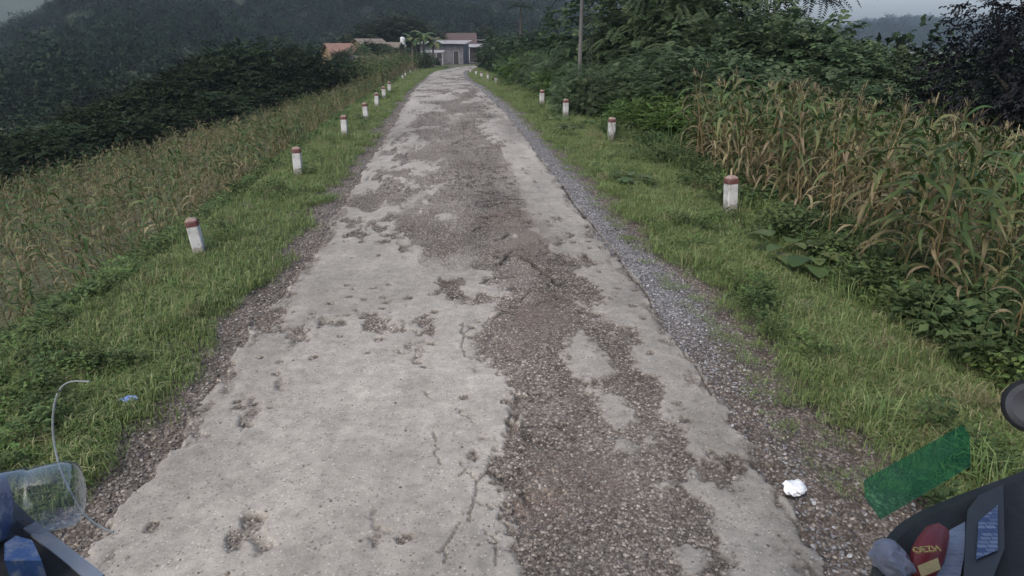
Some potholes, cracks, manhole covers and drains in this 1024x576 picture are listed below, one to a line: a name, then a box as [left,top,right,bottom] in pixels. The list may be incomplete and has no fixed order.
pothole [498,392,529,441]
pothole [218,507,281,558]
pothole [358,317,402,335]
crack [430,404,503,566]
pothole [471,146,505,157]
crack [470,184,661,317]
pothole [230,400,275,434]
pothole [360,505,405,557]
pothole [686,460,743,490]
crack [421,390,437,400]
pothole [501,486,575,535]
crack [458,321,478,358]
